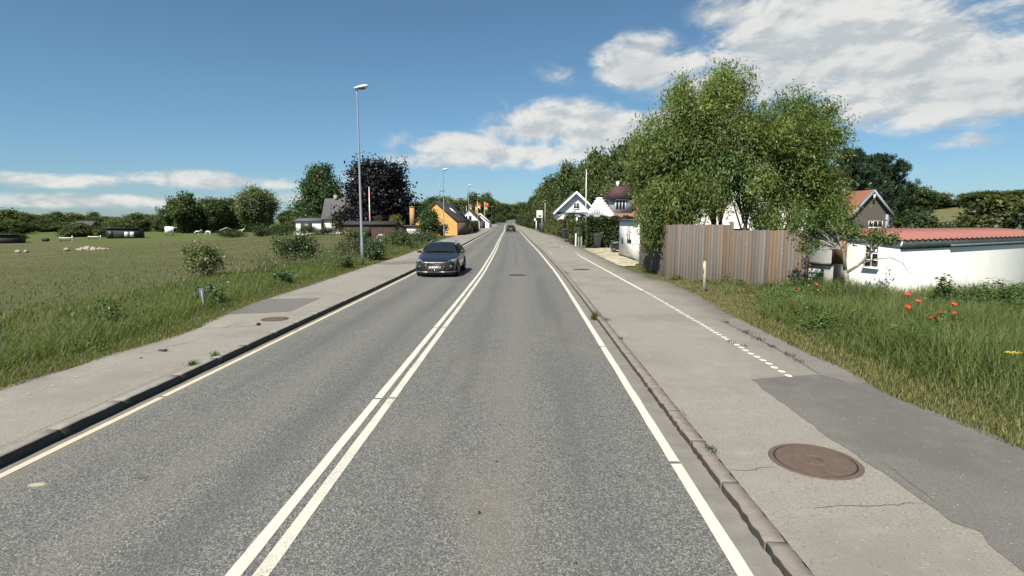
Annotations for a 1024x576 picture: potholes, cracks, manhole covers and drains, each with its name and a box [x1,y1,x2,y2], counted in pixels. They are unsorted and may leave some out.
manhole cover [768,443,865,480]
crack [816,470,927,508]
